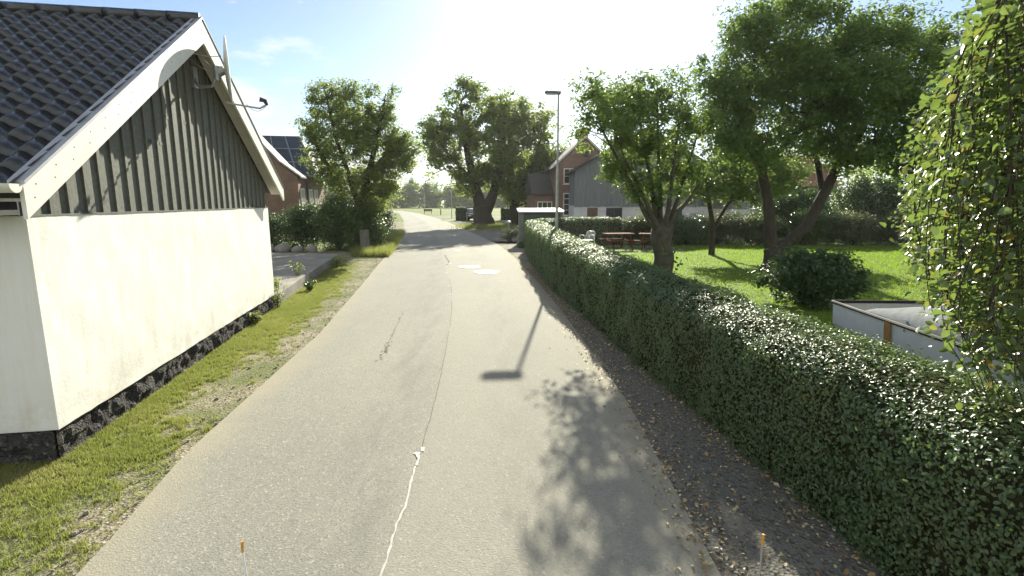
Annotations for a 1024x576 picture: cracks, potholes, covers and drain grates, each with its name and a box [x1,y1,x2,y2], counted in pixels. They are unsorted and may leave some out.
crack [379,250,460,576]
